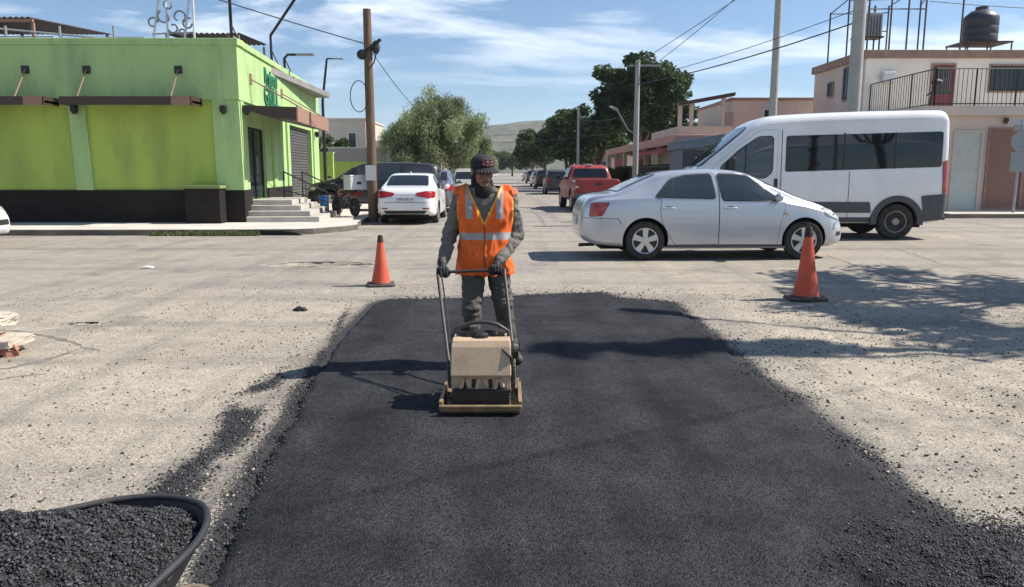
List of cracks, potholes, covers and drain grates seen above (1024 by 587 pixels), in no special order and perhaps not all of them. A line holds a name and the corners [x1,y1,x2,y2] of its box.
crack [0,330,99,379]
